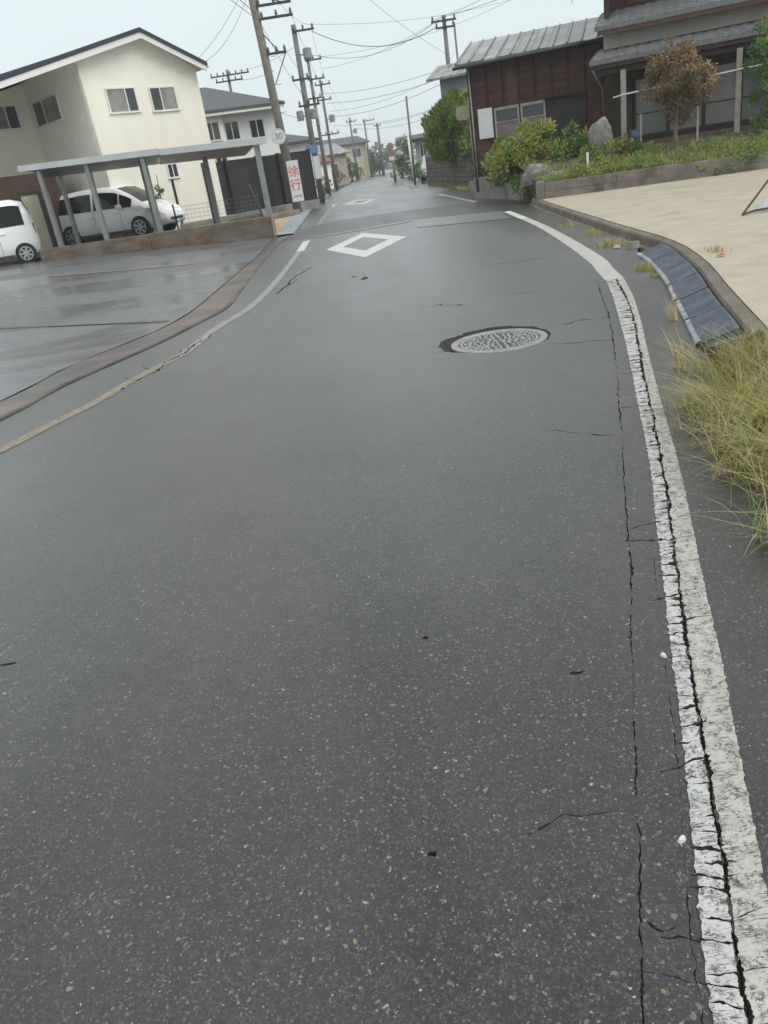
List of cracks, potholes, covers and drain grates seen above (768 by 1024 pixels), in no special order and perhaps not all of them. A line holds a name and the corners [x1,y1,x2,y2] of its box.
crack [105,333,212,400]
crack [277,266,315,294]
manhole cover [451,328,548,353]
crack [527,280,755,1024]
